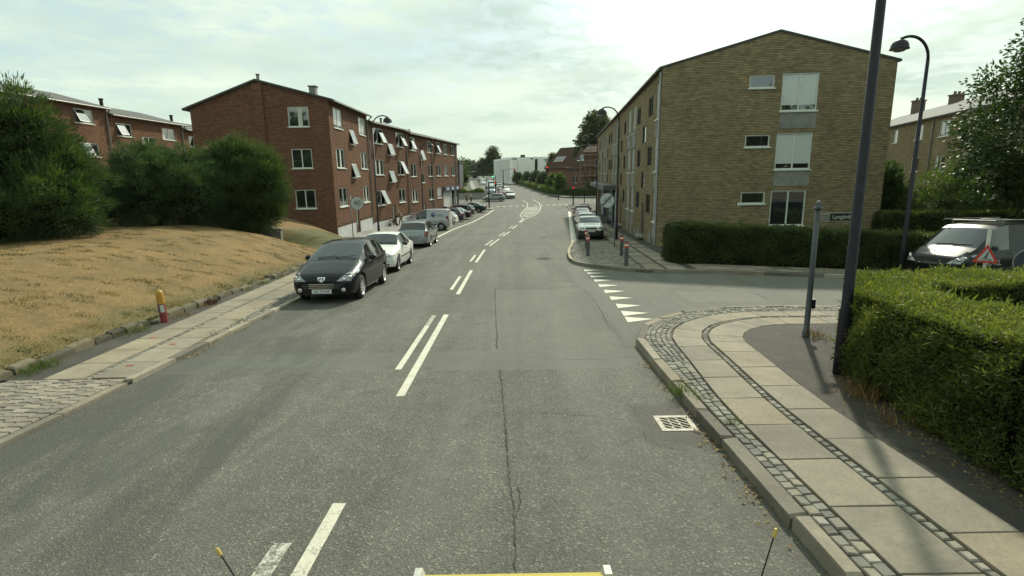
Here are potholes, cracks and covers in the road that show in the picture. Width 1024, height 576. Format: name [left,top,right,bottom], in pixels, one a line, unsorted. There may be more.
crack [494,281,608,348]
drain grate [653,415,699,432]
crack [499,370,689,572]
